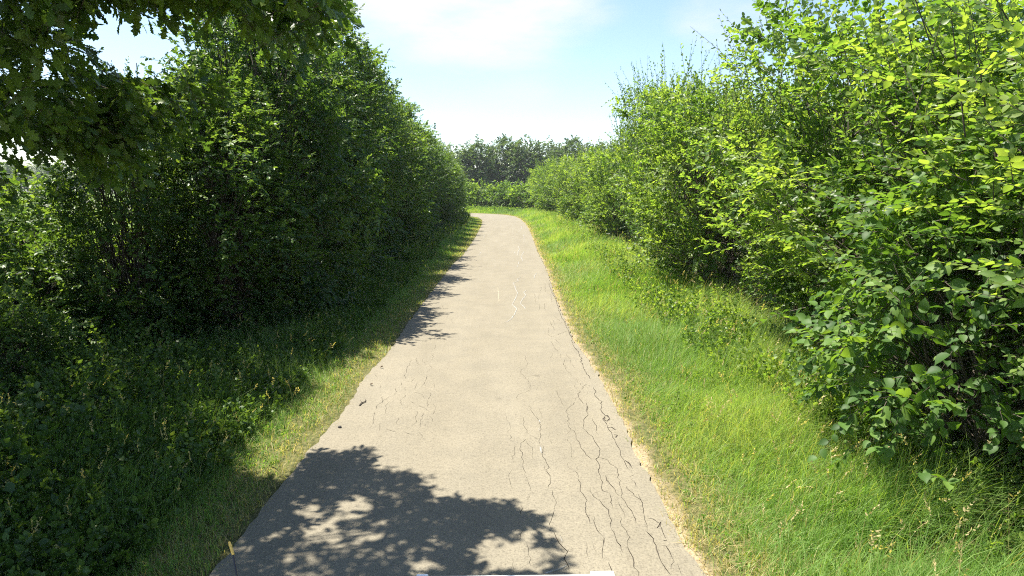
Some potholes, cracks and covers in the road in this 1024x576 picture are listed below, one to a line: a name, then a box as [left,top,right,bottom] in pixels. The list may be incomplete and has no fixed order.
crack [373,305,443,435]
crack [506,286,679,575]
